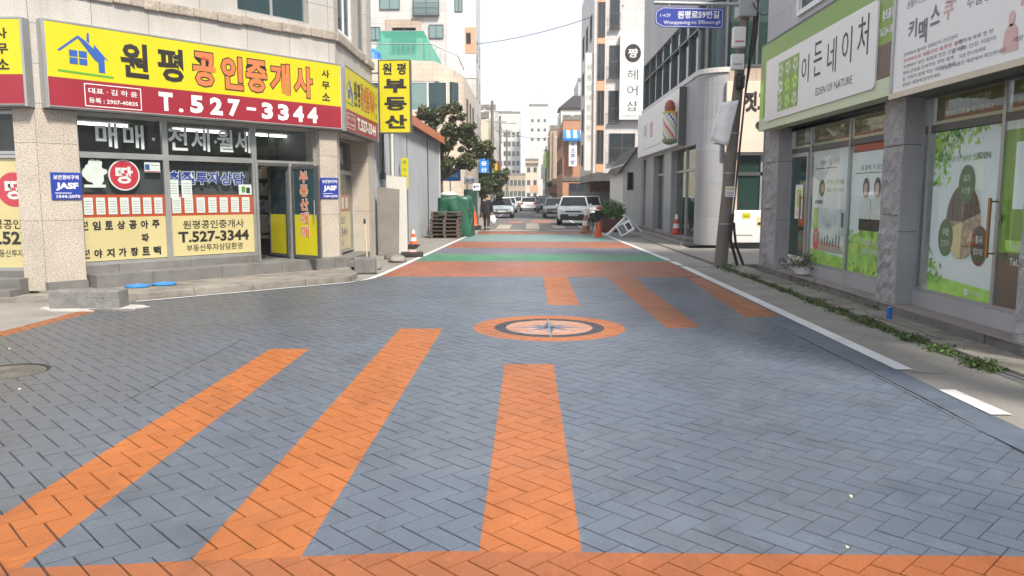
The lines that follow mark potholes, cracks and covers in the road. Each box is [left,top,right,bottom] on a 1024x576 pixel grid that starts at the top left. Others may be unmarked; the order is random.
manhole cover [0,363,52,380]
